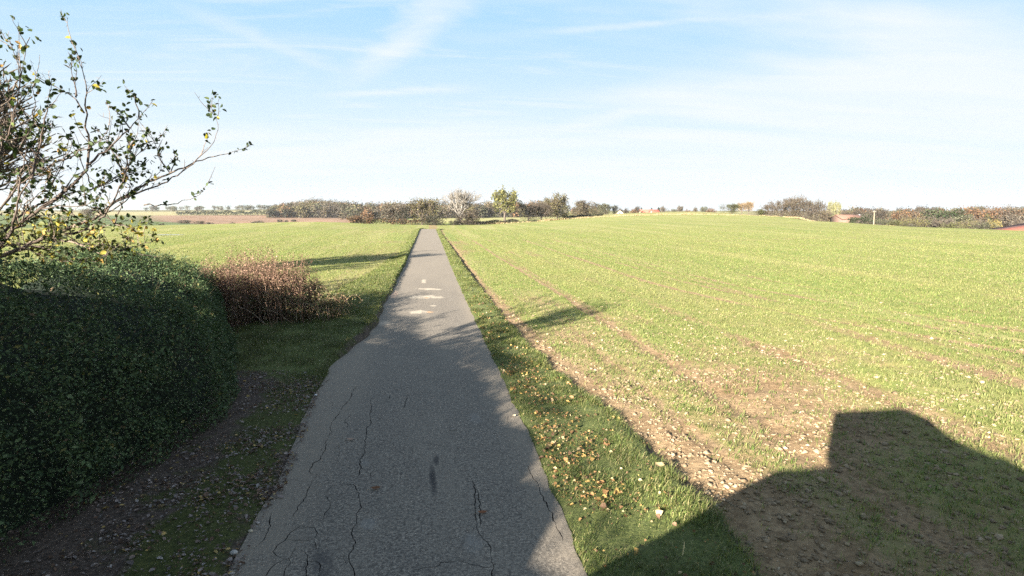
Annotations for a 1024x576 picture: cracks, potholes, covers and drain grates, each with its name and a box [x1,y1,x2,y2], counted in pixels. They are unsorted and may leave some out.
crack [413,476,498,576]
crack [528,468,563,541]
crack [253,387,371,576]
